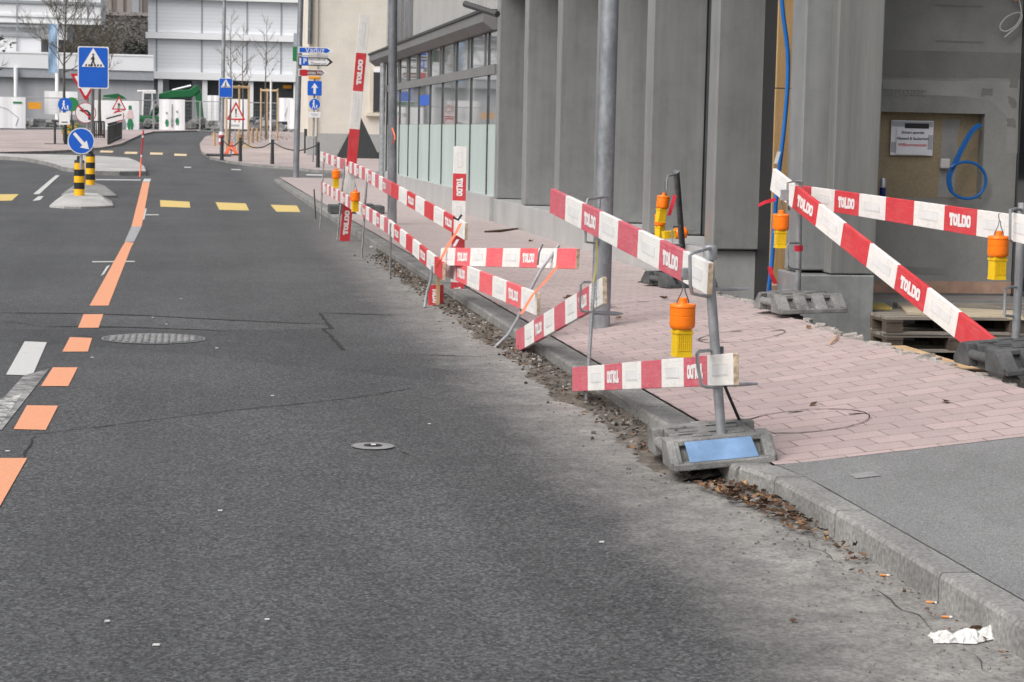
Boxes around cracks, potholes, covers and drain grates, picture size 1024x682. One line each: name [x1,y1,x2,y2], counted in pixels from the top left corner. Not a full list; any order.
crack [319,313,345,350]
manhole cover [101,333,205,344]
manhole cover [351,442,395,450]
